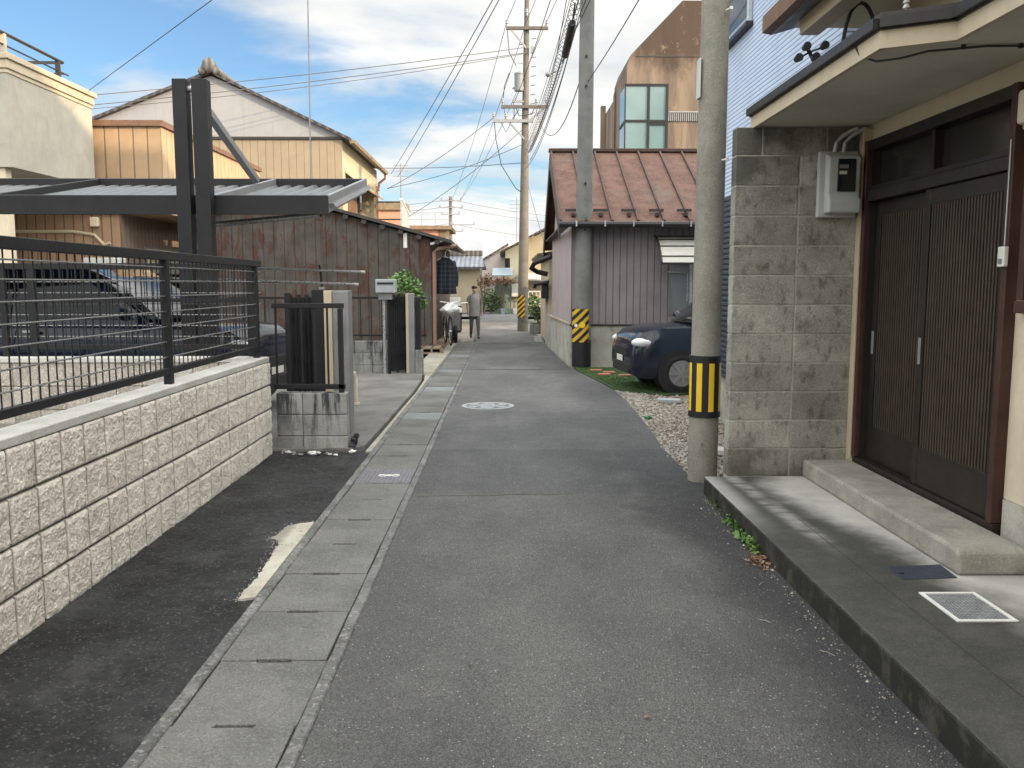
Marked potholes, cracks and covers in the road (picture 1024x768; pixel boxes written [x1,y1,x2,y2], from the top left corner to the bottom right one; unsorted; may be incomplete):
manhole cover [462,402,514,410]
